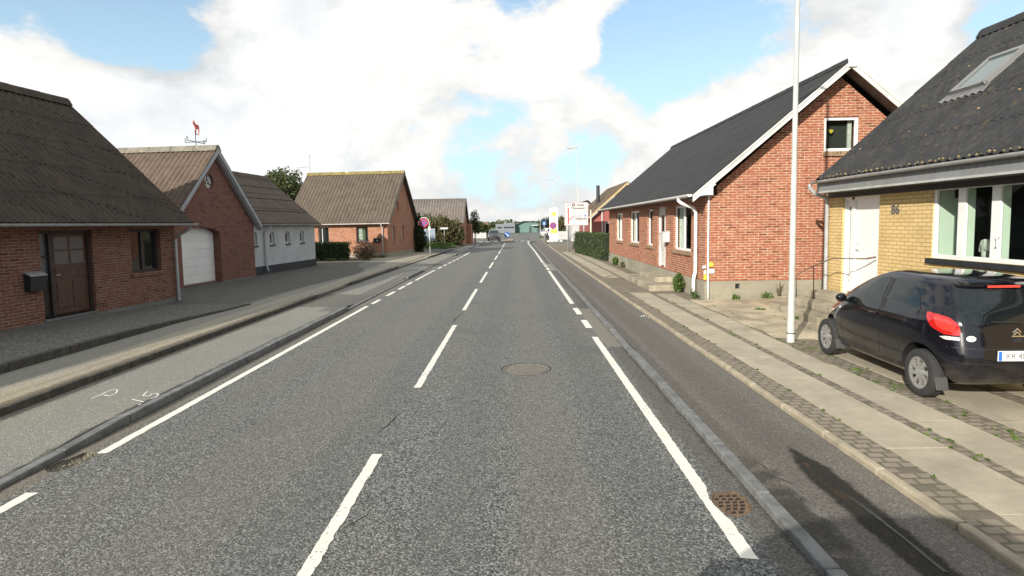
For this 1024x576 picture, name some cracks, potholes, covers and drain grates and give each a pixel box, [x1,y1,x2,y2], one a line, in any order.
manhole cover [501,363,551,375]
pothole [45,452,97,472]
drain grate [711,491,754,517]
